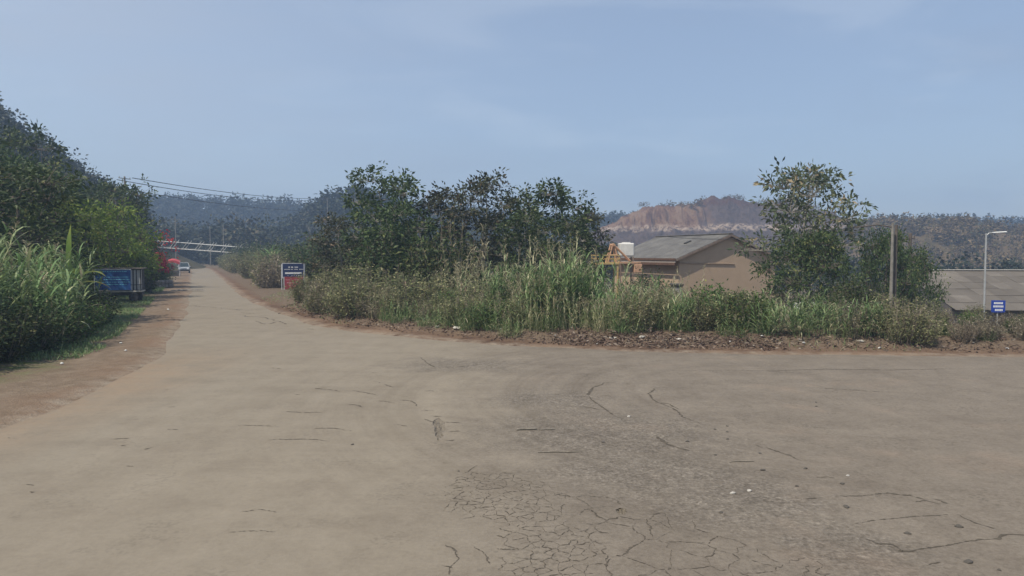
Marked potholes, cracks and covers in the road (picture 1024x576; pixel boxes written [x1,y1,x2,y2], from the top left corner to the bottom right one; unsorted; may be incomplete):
crack [444,466,830,576]
crack [647,387,701,424]
crack [840,492,1022,565]
crack [583,382,689,451]
pothole [433,418,446,441]
